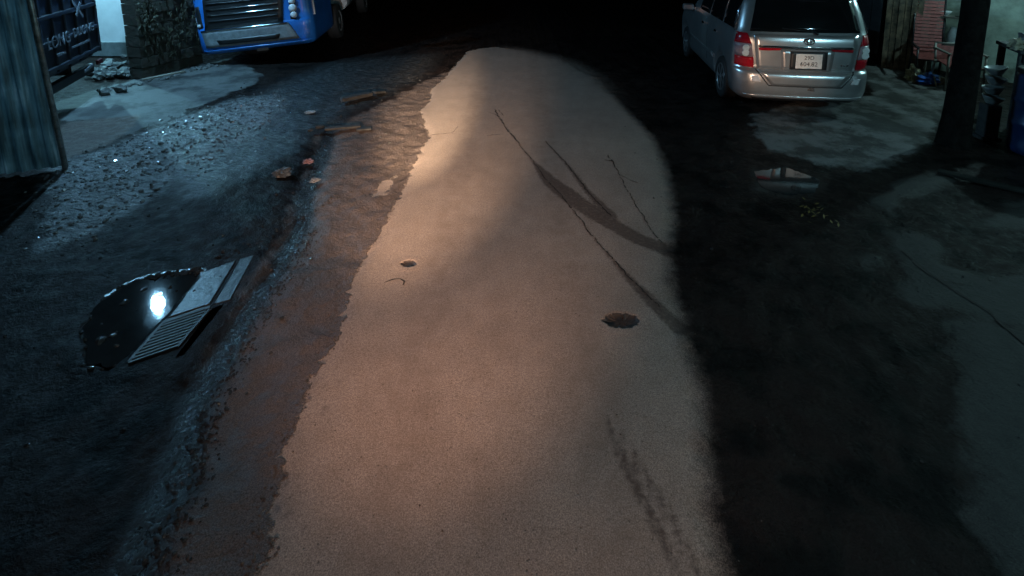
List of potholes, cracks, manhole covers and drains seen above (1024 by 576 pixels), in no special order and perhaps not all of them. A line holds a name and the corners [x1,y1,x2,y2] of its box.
crack [902,250,1024,344]
pothole [64,266,208,379]
crack [488,109,663,307]
